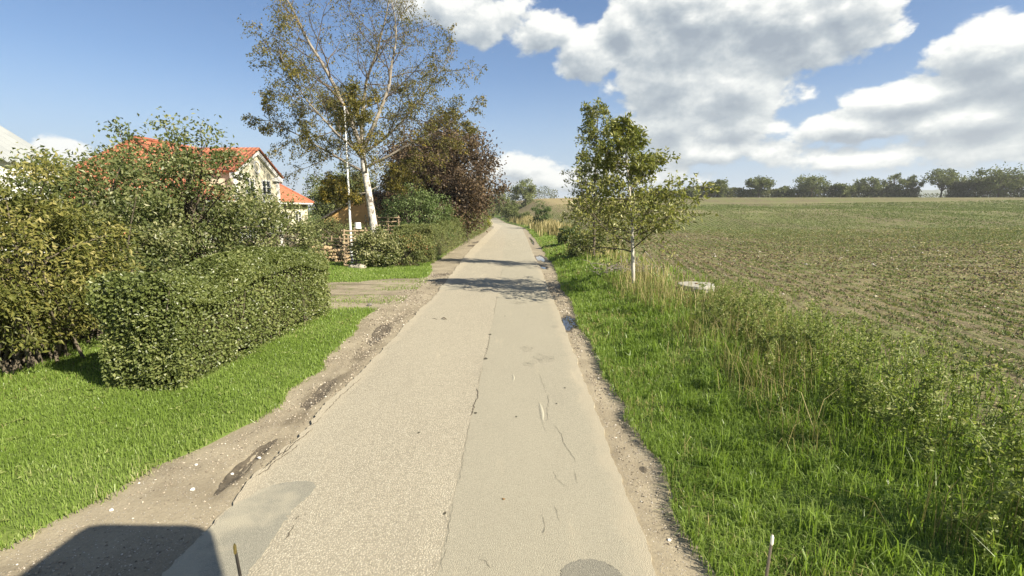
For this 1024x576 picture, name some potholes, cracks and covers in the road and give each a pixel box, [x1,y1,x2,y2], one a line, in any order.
pothole [300,378,337,410]
pothole [213,439,278,496]
pothole [561,314,581,332]
